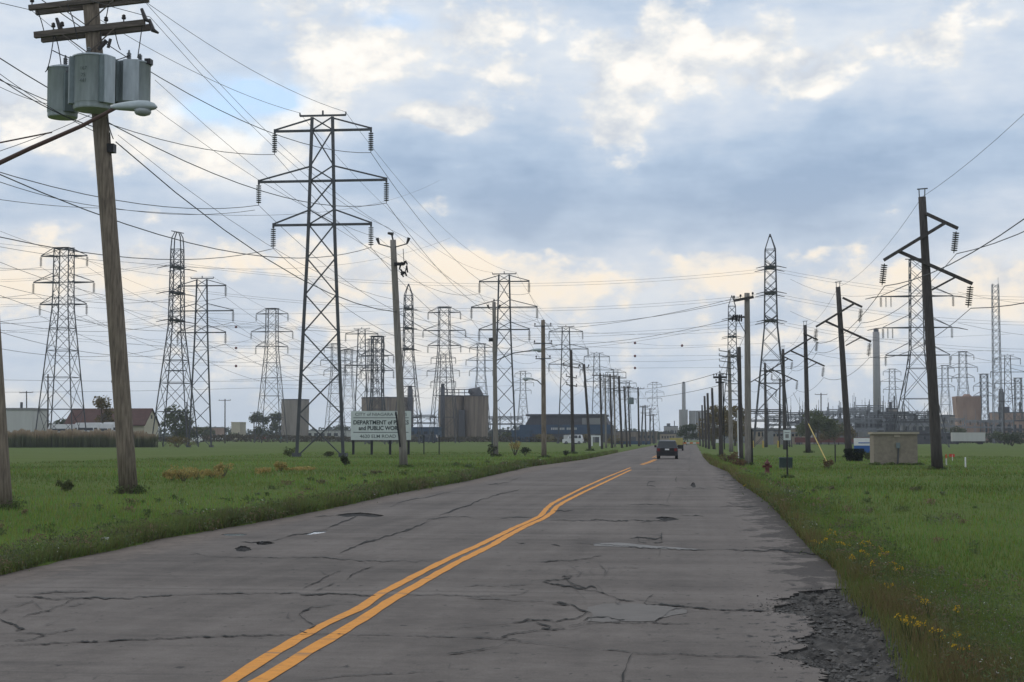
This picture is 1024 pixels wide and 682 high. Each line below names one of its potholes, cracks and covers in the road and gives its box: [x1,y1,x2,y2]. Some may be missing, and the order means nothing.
pothole [743,587,931,682]
crack [0,469,818,680]
